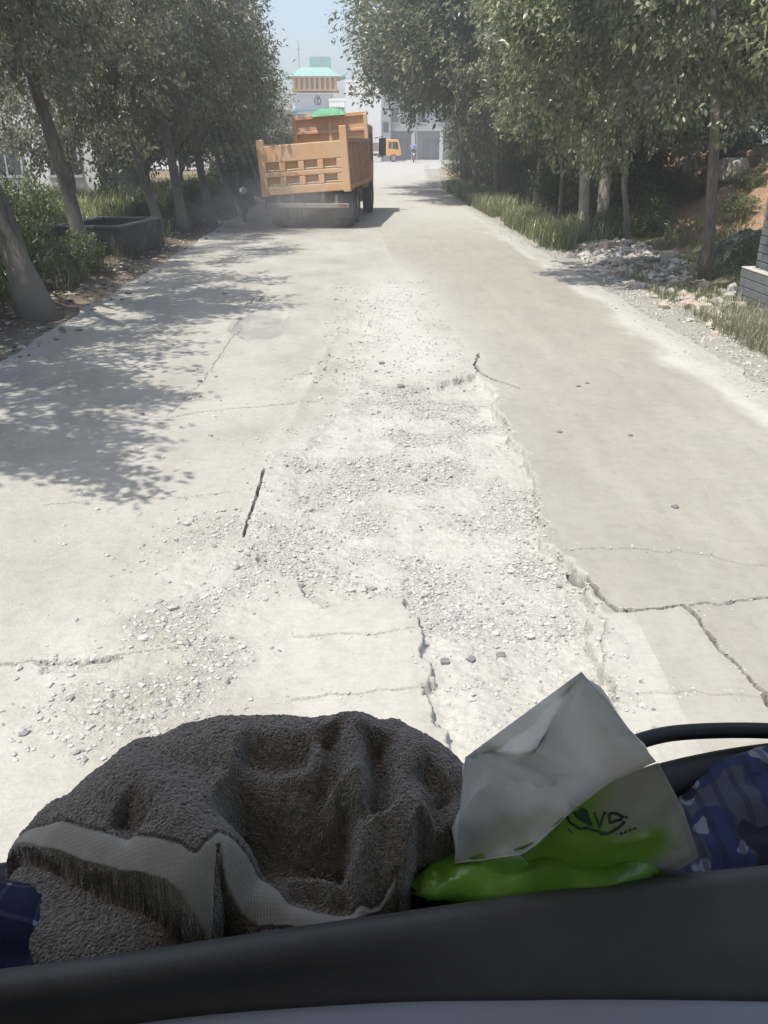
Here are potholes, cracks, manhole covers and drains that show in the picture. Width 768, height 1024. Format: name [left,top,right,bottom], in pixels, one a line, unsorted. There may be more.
crack [293,626,417,638]
crack [472,353,521,389]
crack [43,468,266,538]
crack [0,646,181,667]
pothole [236,371,624,763]
crack [566,547,768,709]
crack [287,685,419,702]
crack [165,327,317,418]
